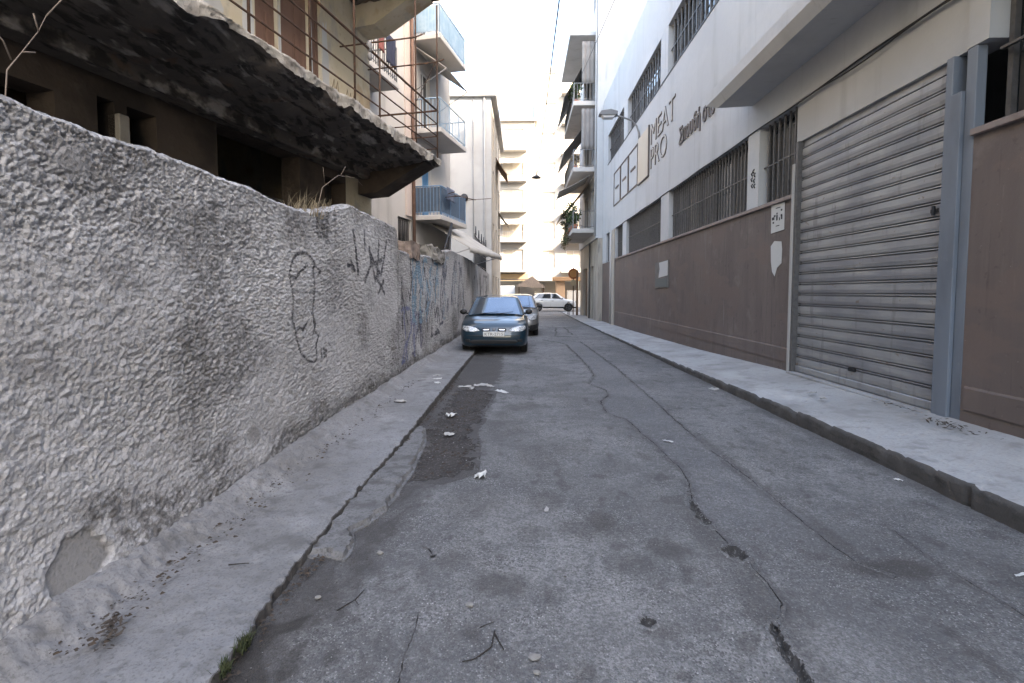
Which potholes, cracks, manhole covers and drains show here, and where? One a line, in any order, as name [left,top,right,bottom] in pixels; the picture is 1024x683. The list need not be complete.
pothole [634,614,661,631]
crack [546,326,787,627]
pothole [718,543,753,563]
